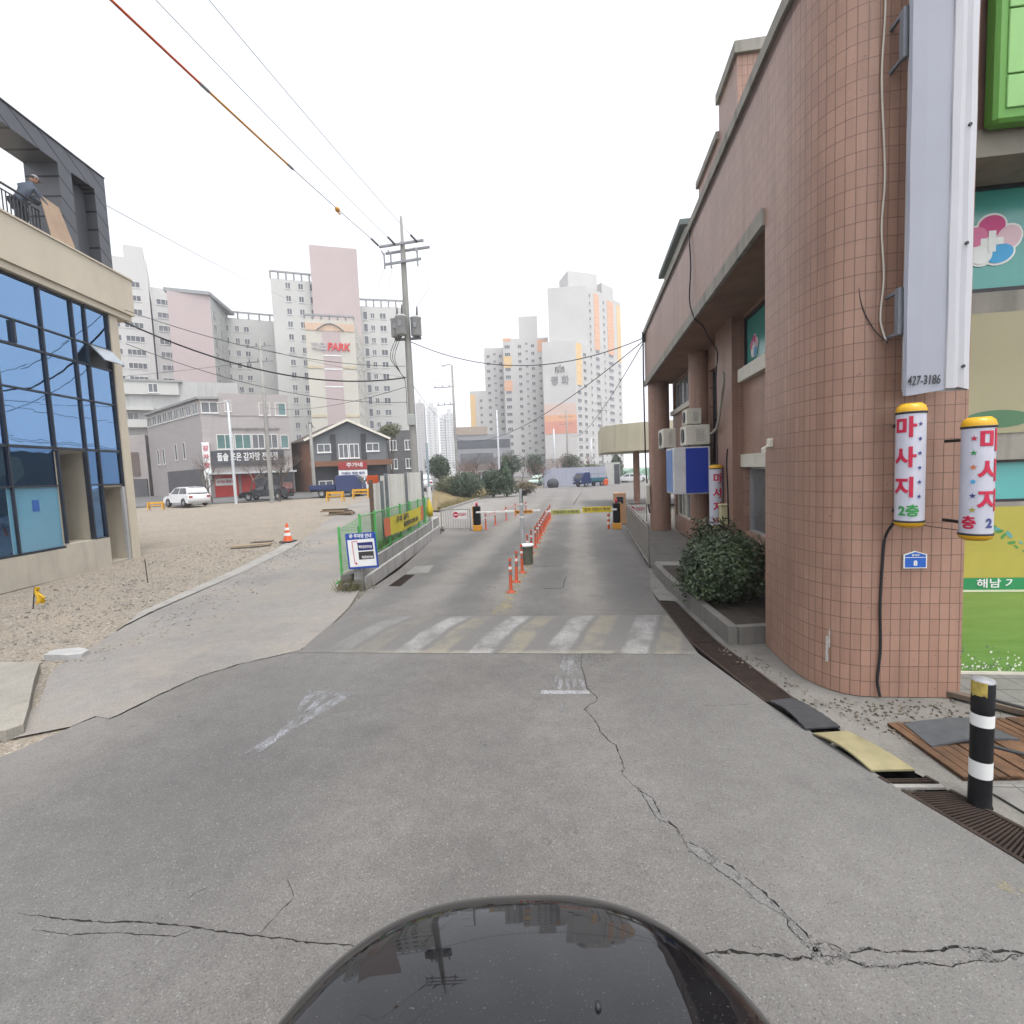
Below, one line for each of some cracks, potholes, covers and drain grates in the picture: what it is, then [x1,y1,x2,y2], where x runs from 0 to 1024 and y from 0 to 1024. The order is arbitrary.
drain grate [658,601,717,643]
crack [19,879,354,946]
drain grate [691,641,794,712]
drain grate [901,789,1024,864]
drain grate [389,575,414,586]
crack [581,658,1024,969]
